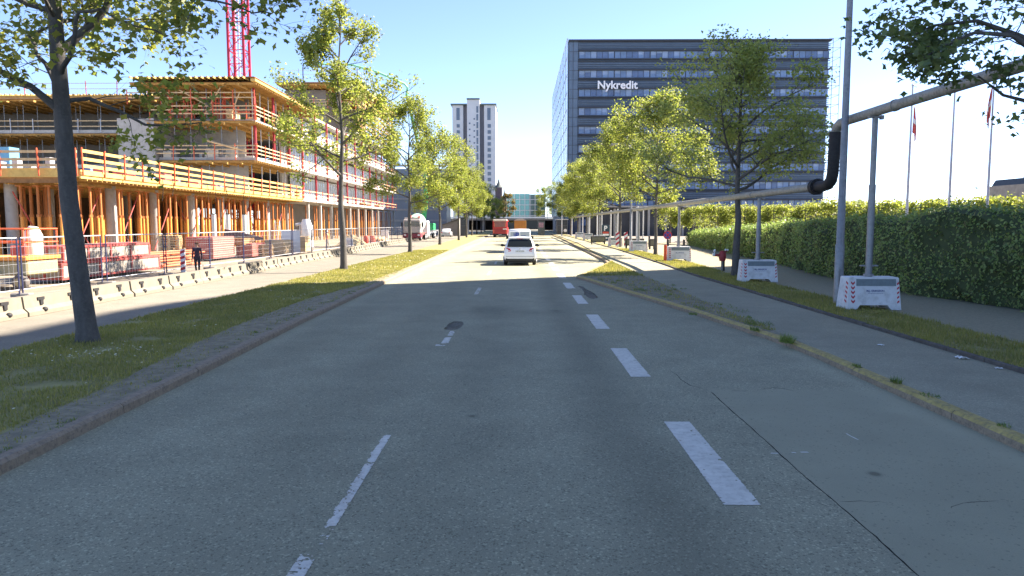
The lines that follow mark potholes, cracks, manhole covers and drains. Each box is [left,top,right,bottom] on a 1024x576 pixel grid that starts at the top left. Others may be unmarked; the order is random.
crack [671,371,919,576]
pothole [444,321,463,330]
